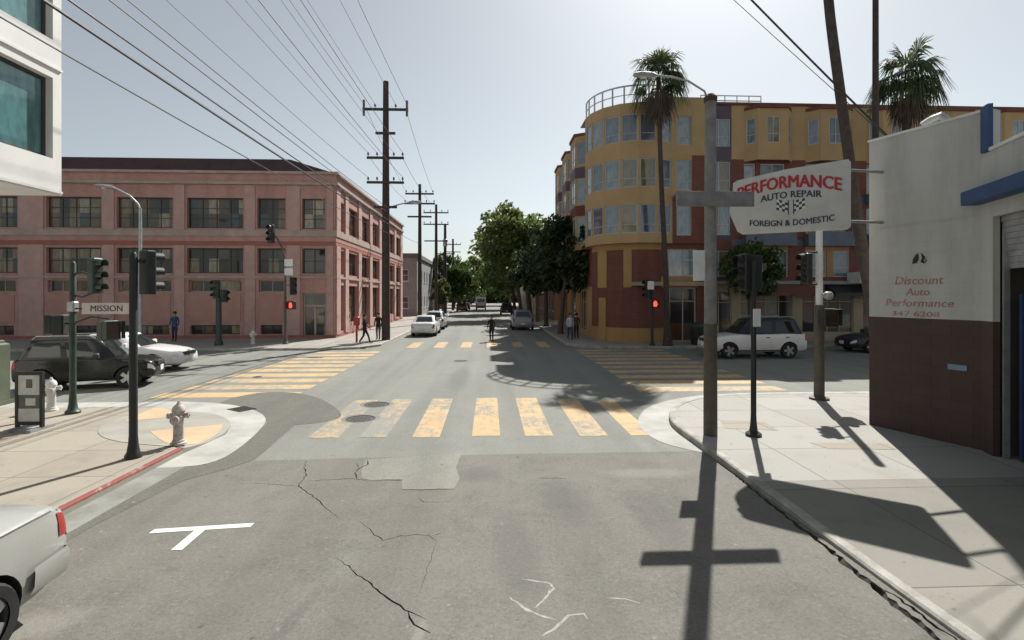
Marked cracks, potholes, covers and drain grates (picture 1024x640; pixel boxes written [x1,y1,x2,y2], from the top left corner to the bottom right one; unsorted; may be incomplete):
crack [333,523,441,633]
crack [248,461,400,517]
